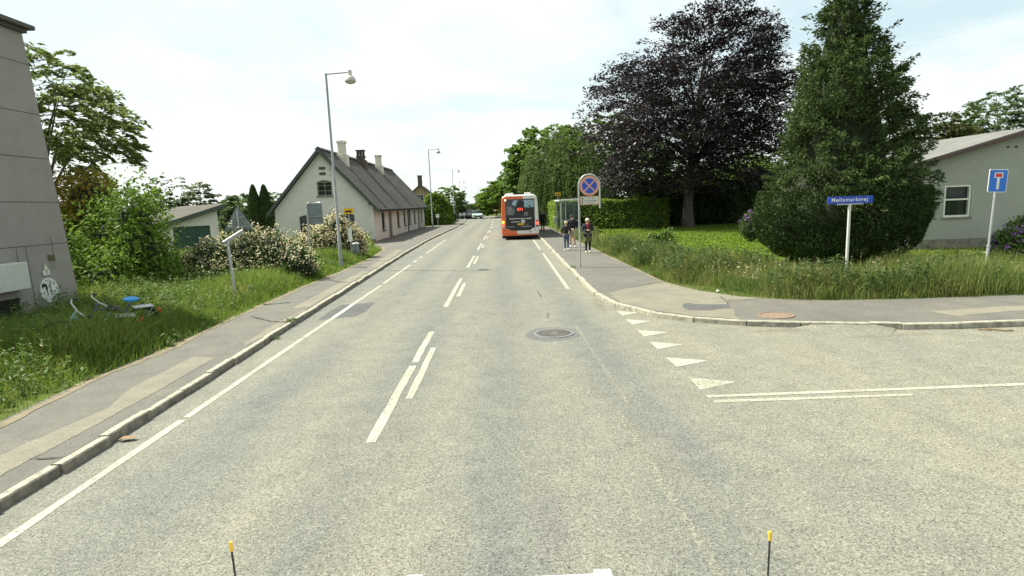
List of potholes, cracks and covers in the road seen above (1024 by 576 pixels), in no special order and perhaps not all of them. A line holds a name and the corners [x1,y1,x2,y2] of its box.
manhole cover [533,329,574,338]
manhole cover [757,311,795,319]
